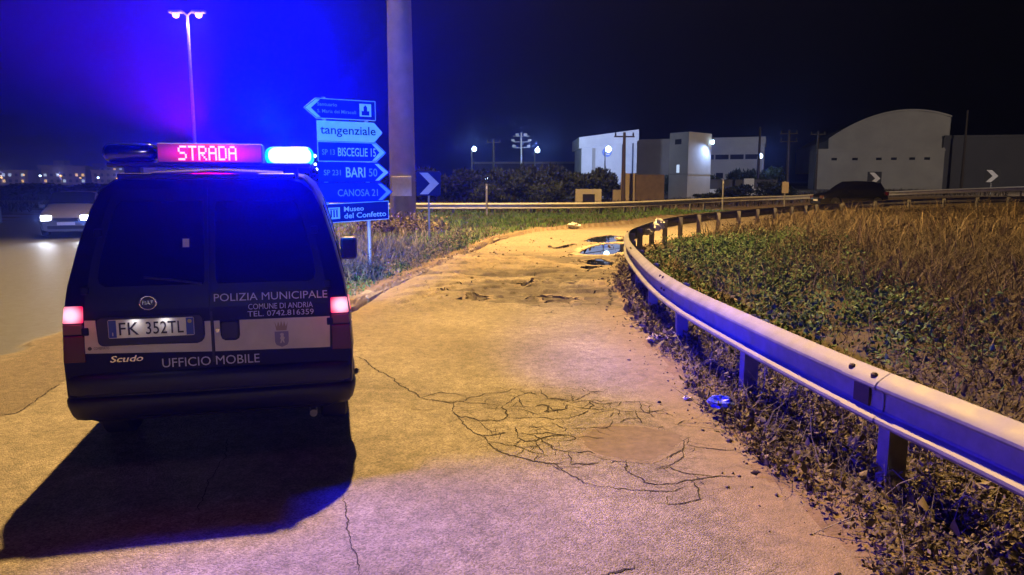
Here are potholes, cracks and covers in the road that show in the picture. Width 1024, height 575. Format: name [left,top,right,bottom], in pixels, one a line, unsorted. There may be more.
crack [2,384,60,416]
pothole [572,242,624,256]
crack [197,437,229,513]
pothole [462,292,496,302]
pothole [535,294,586,304]
crack [359,349,743,504]
